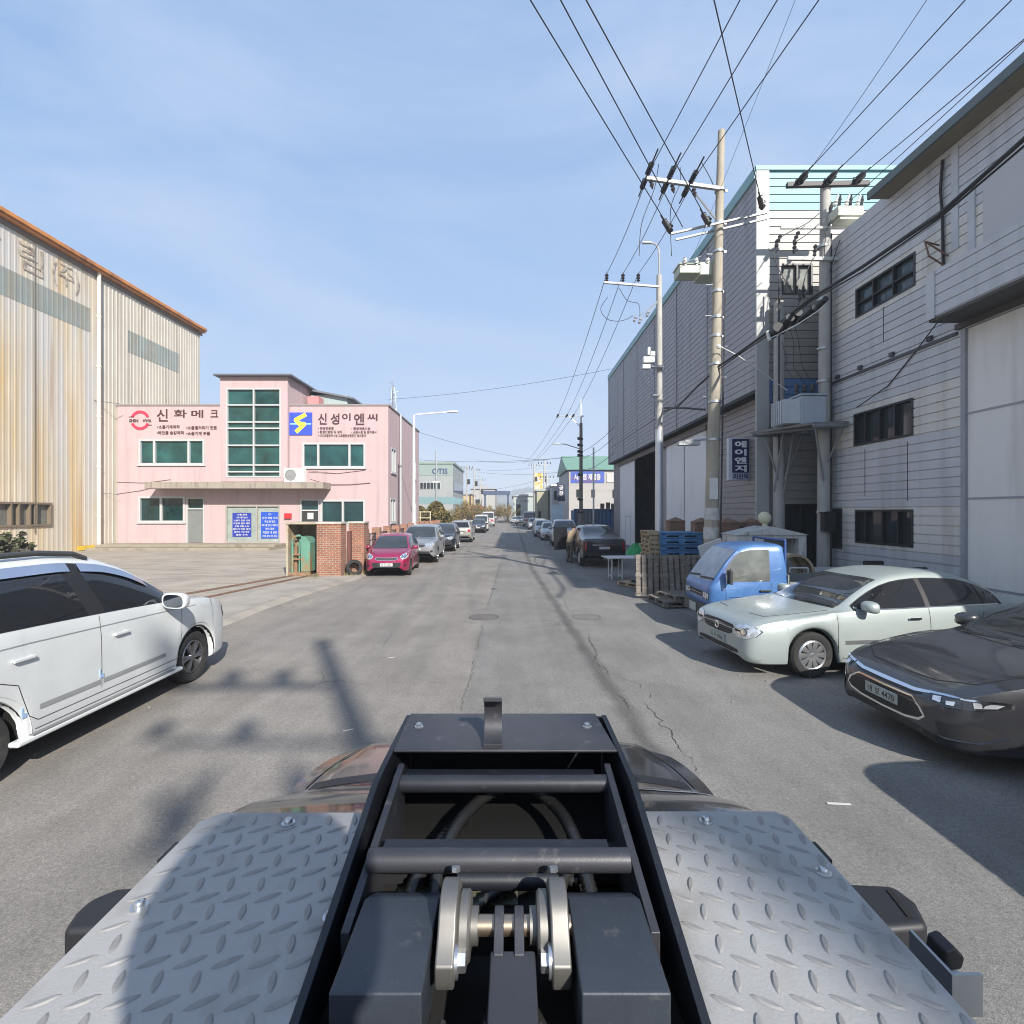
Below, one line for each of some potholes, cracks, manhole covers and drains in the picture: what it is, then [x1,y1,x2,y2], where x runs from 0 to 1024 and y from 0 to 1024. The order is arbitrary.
crack [460,576,497,710]
crack [588,636,700,774]
